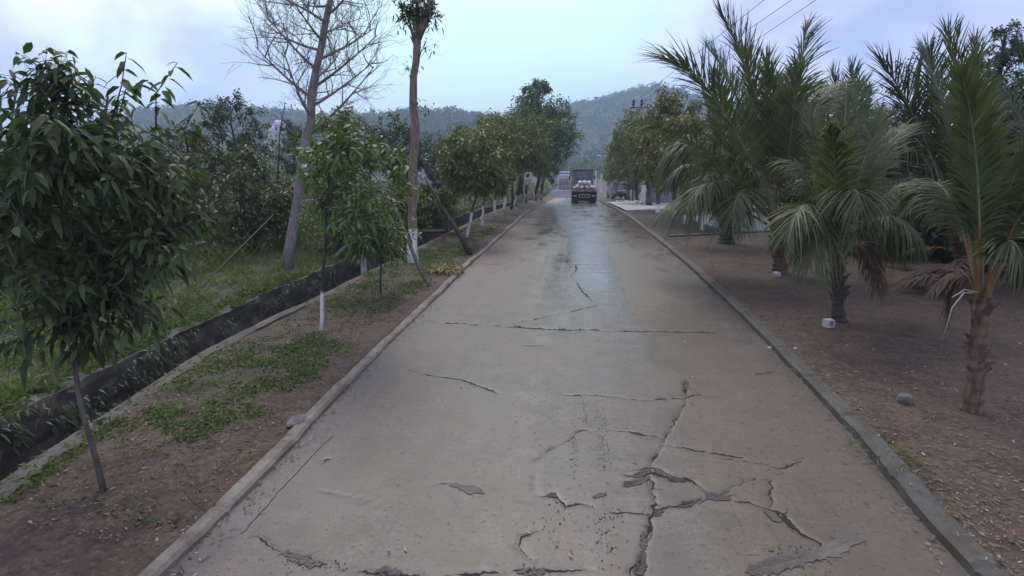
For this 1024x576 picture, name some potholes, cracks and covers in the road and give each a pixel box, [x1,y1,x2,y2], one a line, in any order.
pothole [449,483,485,494]
crack [408,370,496,393]
crack [566,377,822,576]
pothole [745,536,865,576]
pothole [280,549,323,569]
crack [542,495,586,509]
